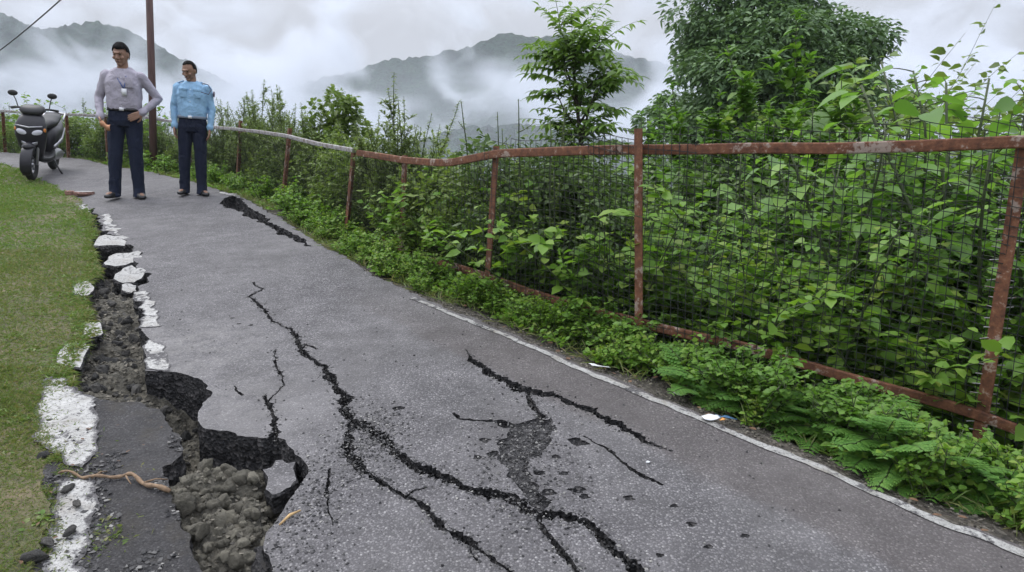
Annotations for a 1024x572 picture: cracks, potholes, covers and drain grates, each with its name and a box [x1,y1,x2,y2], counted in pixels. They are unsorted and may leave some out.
pothole [76,208,309,572]
crack [234,282,671,572]
